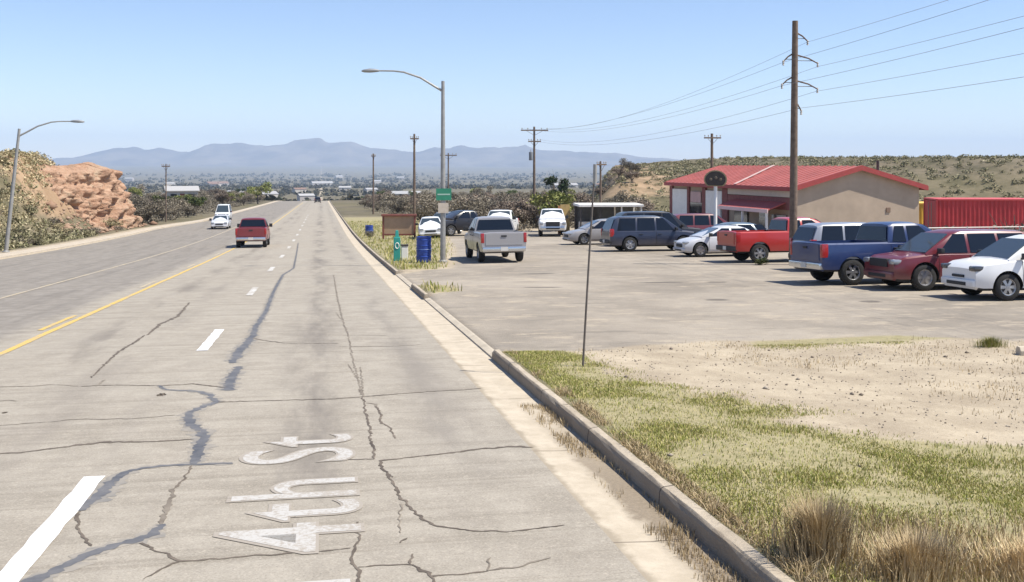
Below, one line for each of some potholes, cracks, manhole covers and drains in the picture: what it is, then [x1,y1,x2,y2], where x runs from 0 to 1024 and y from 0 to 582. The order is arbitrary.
crack [90,302,190,386]
crack [0,439,189,454]
crack [221,275,562,582]
